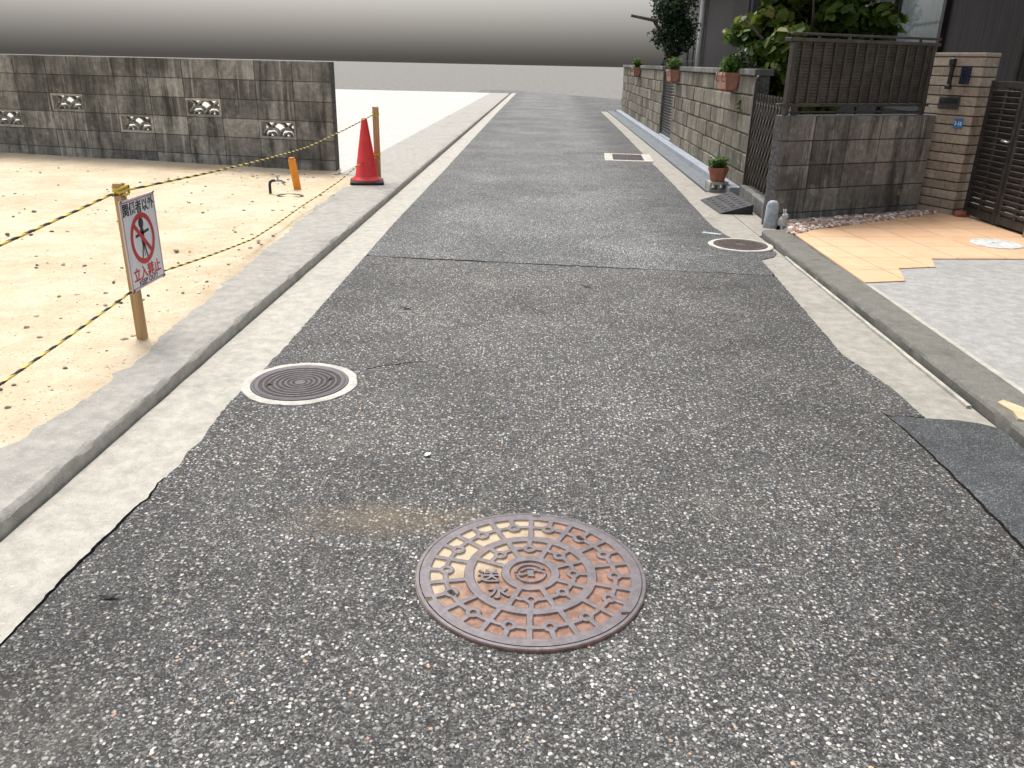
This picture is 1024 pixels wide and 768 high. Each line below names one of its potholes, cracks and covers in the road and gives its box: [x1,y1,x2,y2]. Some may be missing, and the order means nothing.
manhole cover [415,513,647,653]
crack [368,361,427,369]
manhole cover [708,238,773,252]
manhole cover [241,363,357,406]
utility cover [969,238,1023,249]
